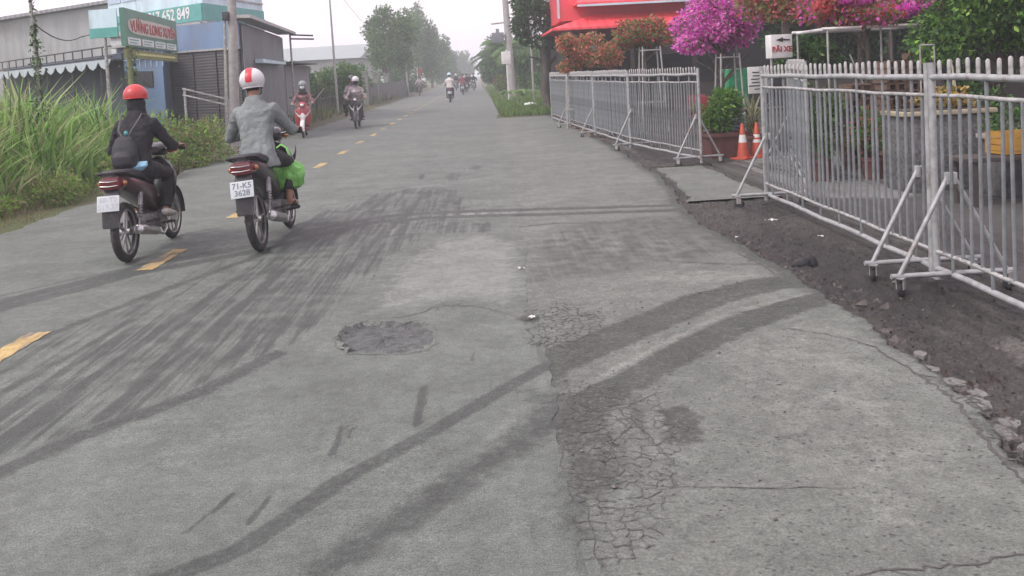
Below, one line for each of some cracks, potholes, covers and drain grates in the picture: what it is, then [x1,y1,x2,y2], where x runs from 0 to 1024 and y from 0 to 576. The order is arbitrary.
crack [781,328,1024,483]
crack [521,302,605,349]
crack [561,382,840,571]
crack [856,553,1024,576]
crack [355,305,506,323]
